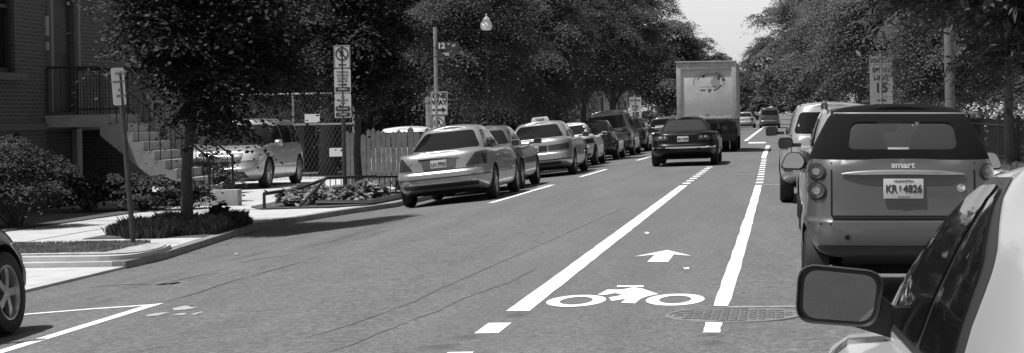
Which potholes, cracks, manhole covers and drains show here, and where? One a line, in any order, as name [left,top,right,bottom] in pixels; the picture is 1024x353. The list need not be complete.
manhole cover [664,307,799,323]
crack [306,208,622,352]
crack [90,254,293,301]
